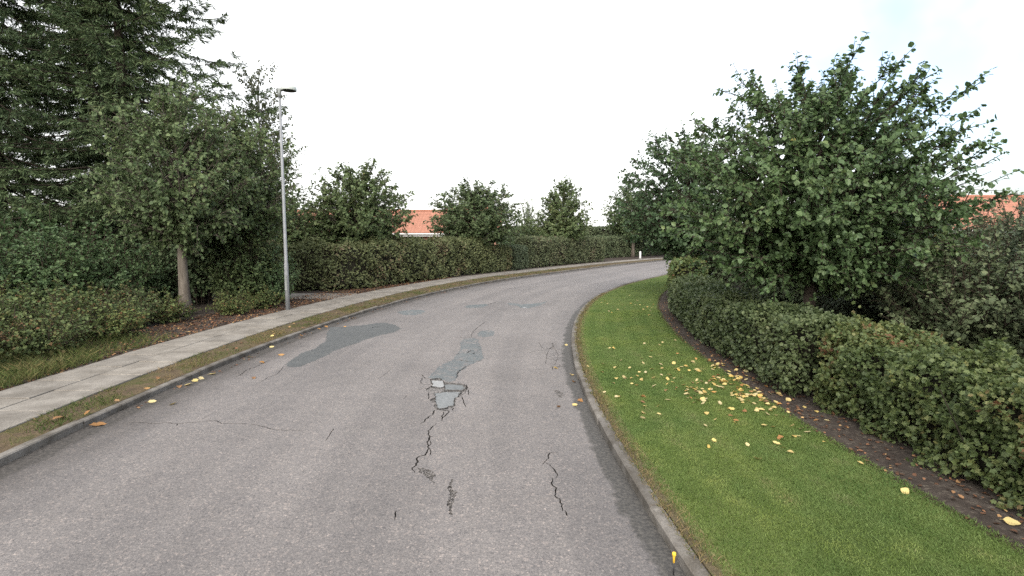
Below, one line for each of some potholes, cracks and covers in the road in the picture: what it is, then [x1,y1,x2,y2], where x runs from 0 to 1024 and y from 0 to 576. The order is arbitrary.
pothole [426,378,468,411]
crack [540,343,566,369]
crack [542,452,567,515]
crack [411,324,482,515]
crack [129,416,305,431]
